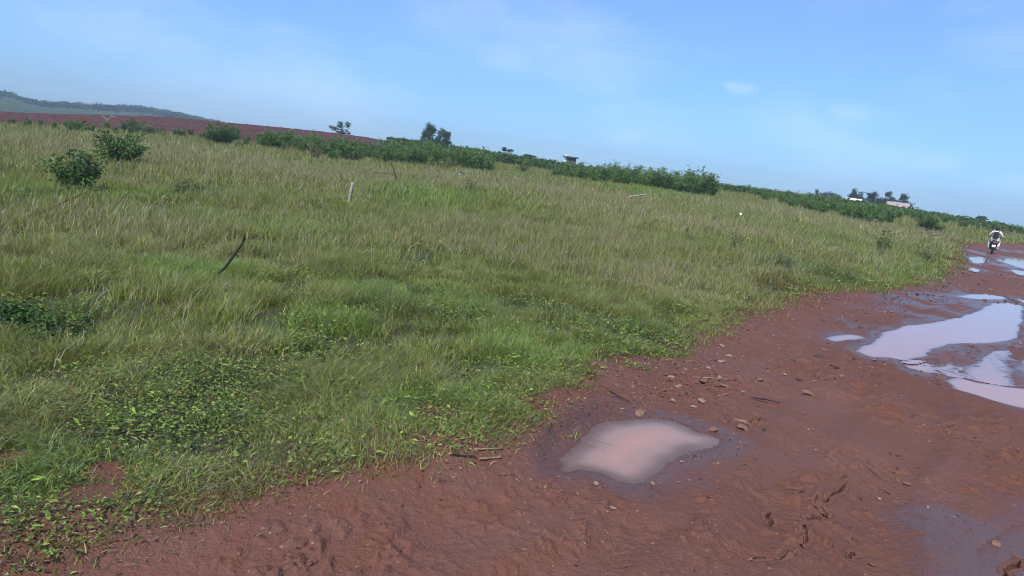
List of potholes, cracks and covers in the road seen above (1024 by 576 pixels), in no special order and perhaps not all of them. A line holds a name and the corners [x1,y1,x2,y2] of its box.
pothole [845,301,1024,364]
pothole [893,347,1024,387]
pothole [963,255,990,264]
pothole [544,409,733,489]
pothole [947,292,1012,301]
pothole [821,332,868,342]
pothole [935,374,1024,409]
pothole [991,257,1024,269]
